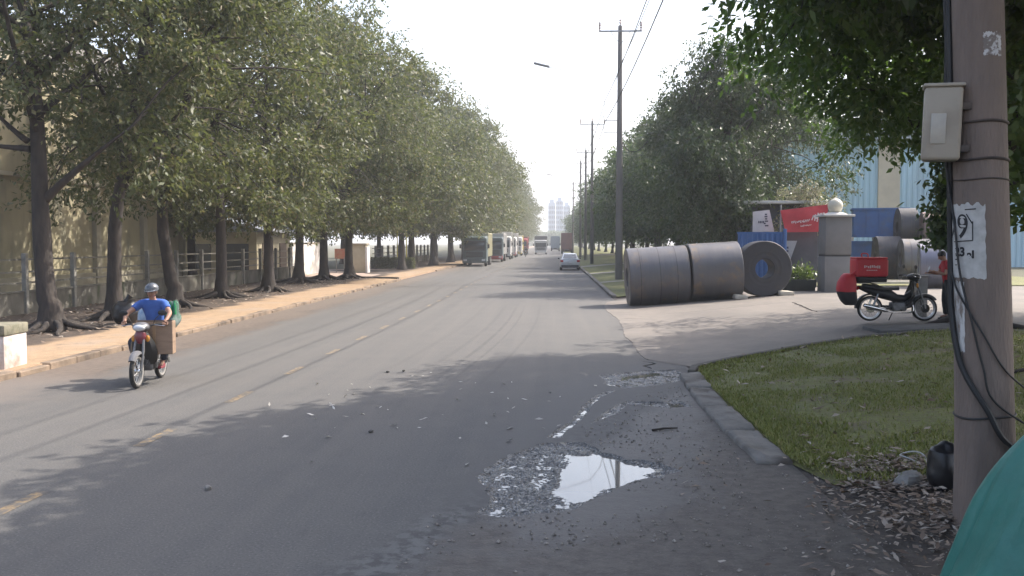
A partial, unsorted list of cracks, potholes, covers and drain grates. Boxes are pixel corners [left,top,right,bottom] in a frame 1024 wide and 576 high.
pothole [476,442,680,518]
pothole [592,398,692,423]
pothole [600,370,682,388]
